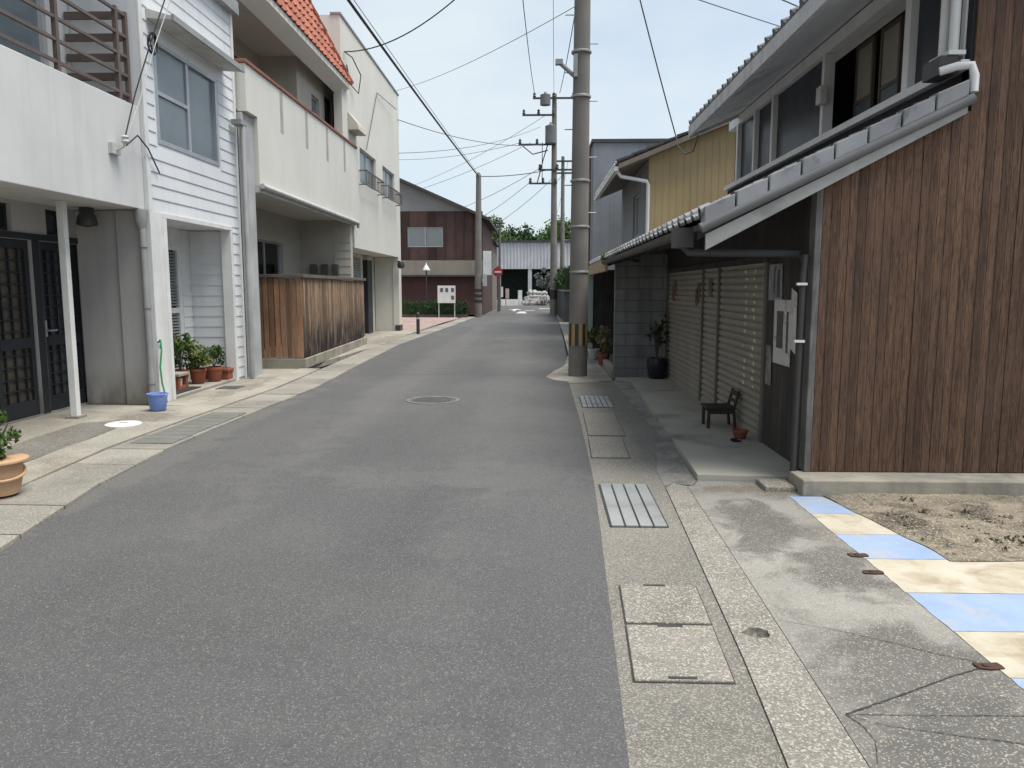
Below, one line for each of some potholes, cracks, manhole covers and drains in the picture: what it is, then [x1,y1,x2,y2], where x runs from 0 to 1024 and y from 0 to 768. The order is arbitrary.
manhole cover [406,396,460,404]
drain grate [598,483,669,528]
drain grate [130,412,246,444]
manhole cover [104,420,142,428]
pothole [740,627,770,638]
drain grate [579,396,614,408]
crack [782,620,1024,763]
